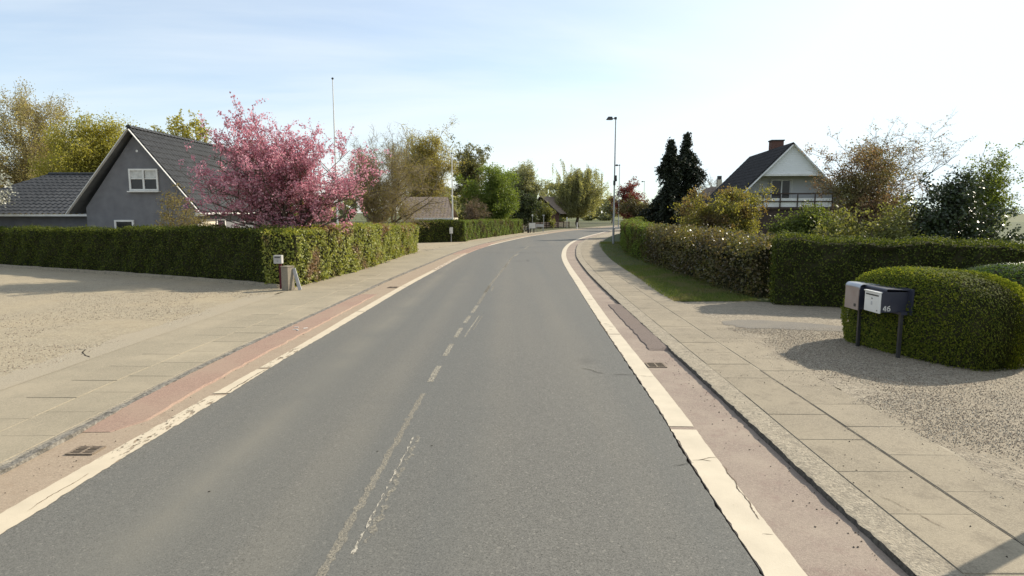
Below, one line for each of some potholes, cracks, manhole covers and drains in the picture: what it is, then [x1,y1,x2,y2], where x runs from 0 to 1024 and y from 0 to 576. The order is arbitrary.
drain grate [65,446,106,455]
